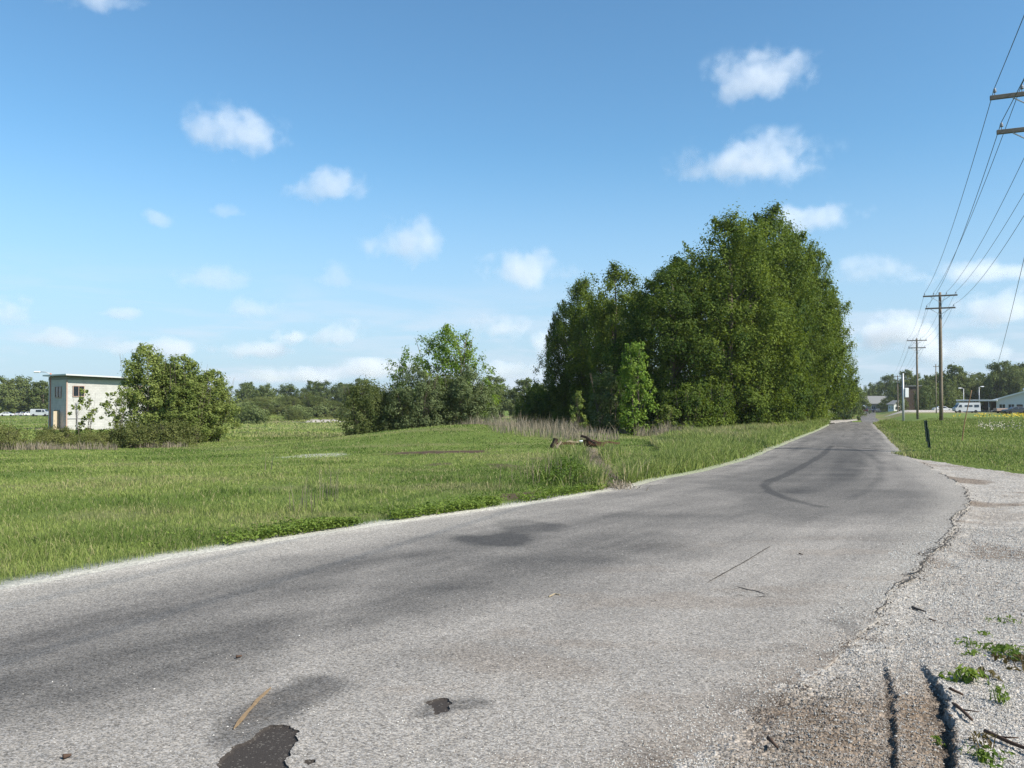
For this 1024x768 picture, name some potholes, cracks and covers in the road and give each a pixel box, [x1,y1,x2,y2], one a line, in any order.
crack [876,462,971,618]
pothole [415,695,463,719]
crack [708,546,772,597]
pothole [203,721,325,768]
